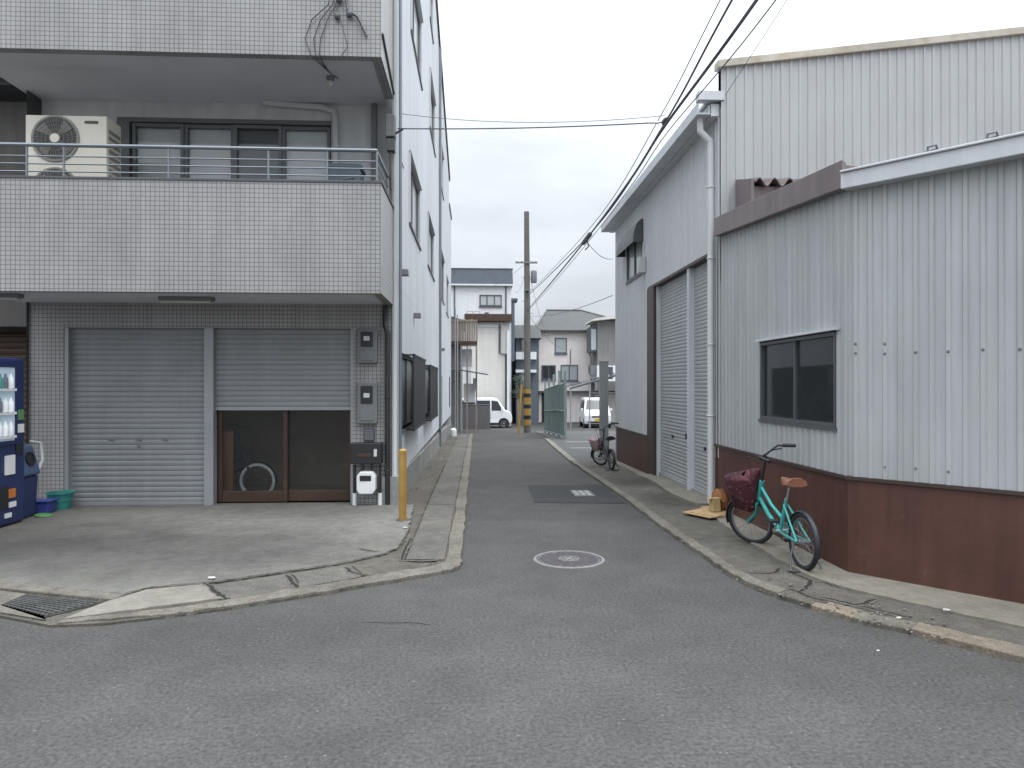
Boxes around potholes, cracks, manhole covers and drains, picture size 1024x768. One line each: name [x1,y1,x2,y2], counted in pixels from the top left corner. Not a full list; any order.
crack [745,568,911,619]
crack [202,583,229,600]
drain grate [2,594,103,617]
crack [343,548,379,575]
crack [283,575,301,588]
manhole cover [533,550,605,569]
